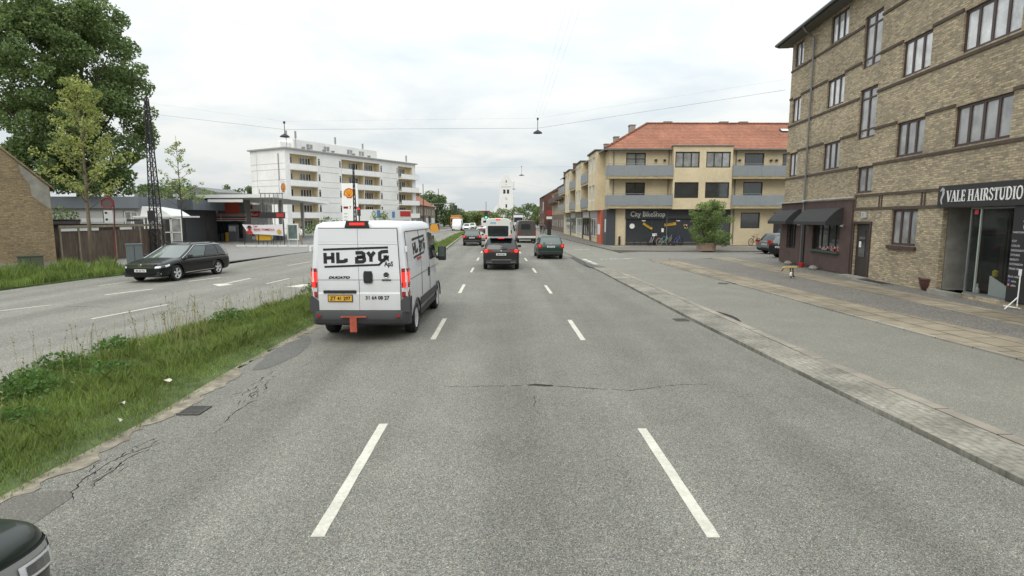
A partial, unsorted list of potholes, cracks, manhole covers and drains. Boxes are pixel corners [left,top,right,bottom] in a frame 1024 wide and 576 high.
crack [216,364,307,432]
crack [448,384,705,414]
crack [70,438,159,500]
